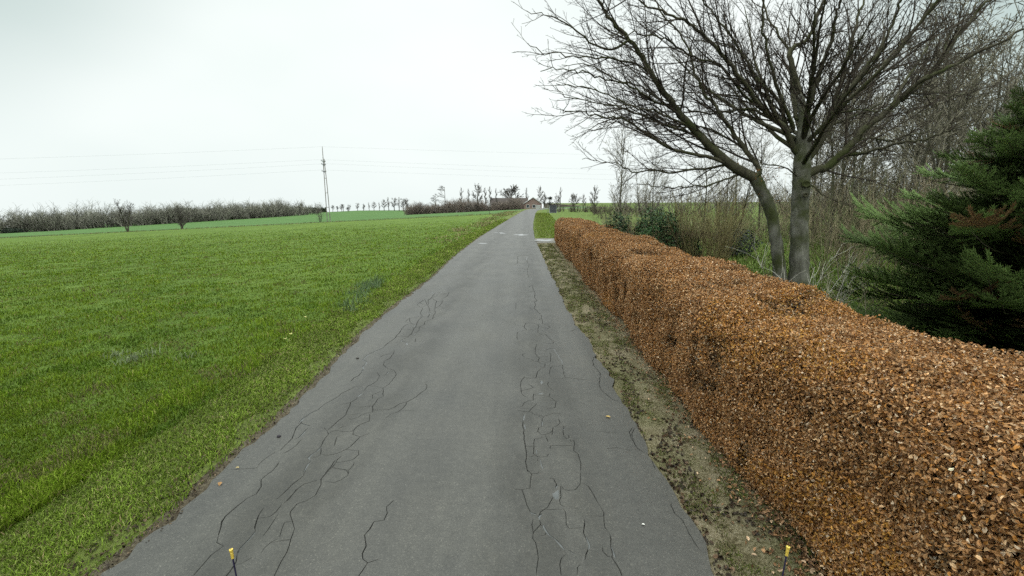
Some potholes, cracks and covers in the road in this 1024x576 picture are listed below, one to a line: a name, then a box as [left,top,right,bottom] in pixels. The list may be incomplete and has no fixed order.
crack [194,291,450,576]
crack [670,501,701,551]
